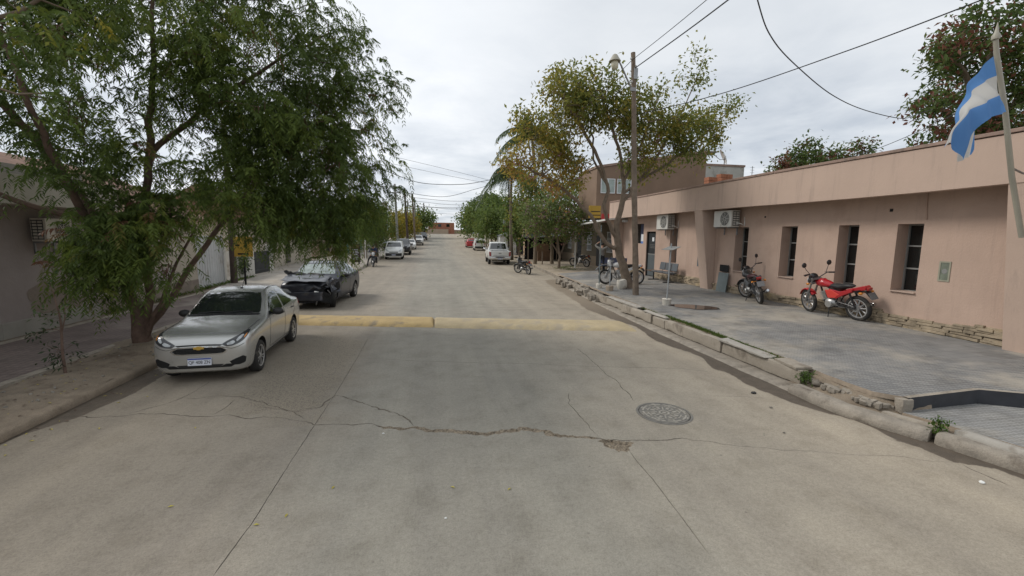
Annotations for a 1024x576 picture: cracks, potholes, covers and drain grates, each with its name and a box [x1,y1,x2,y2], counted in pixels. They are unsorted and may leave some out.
manhole cover [636,402,693,425]
crack [76,382,942,462]
pothole [599,439,634,452]
